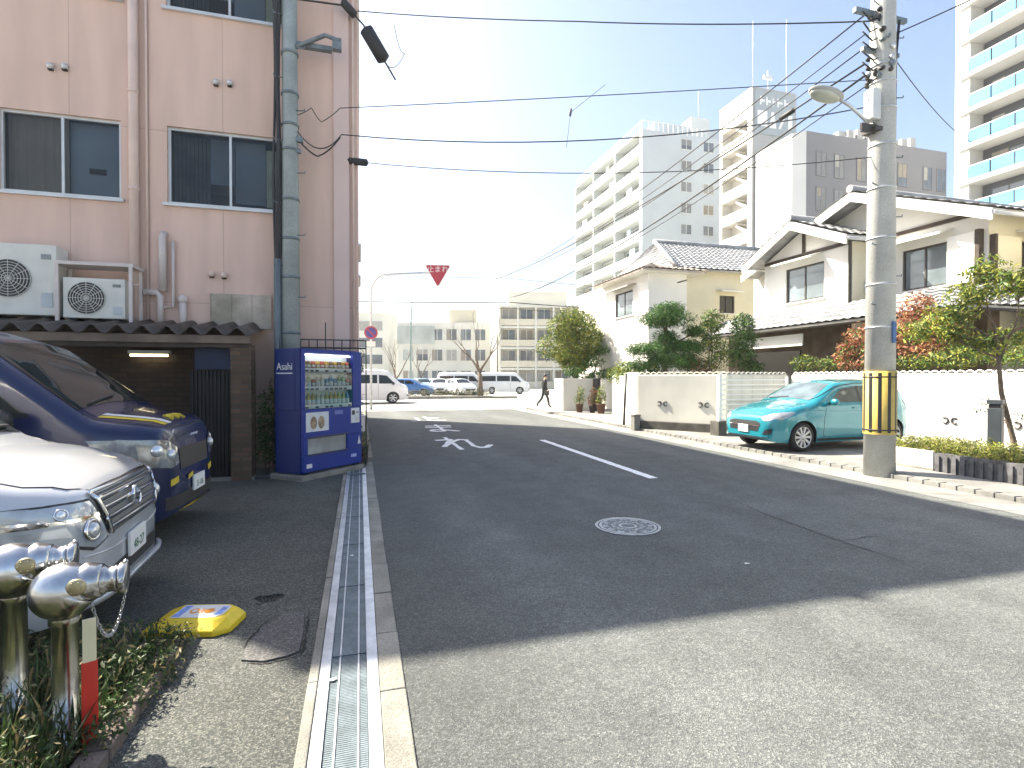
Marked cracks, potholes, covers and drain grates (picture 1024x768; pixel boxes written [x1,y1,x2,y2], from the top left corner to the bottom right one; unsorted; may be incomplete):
manhole cover [595,517,661,536]
crack [242,613,310,665]
crack [741,503,894,559]
pothole [254,593,285,605]
